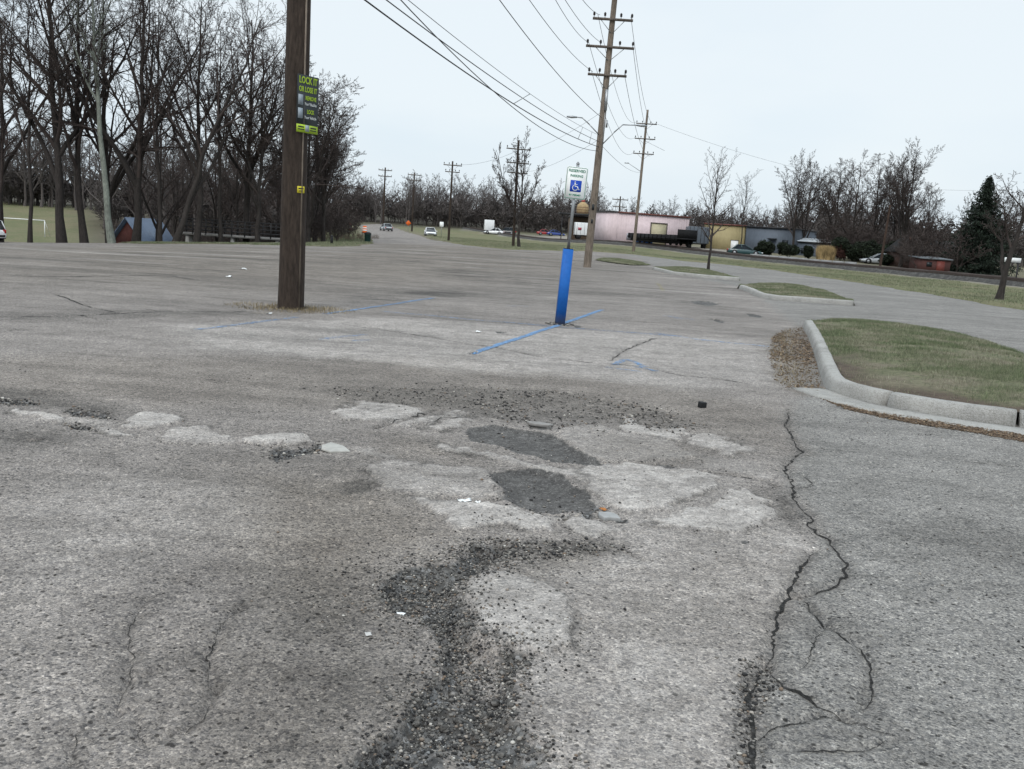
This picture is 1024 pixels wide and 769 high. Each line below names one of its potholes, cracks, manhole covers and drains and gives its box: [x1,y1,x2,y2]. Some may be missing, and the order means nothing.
crack [23,295,216,317]
pothole [66,409,113,420]
pothole [249,505,654,769]
crack [734,414,906,769]
crack [70,594,233,763]
pothole [265,441,323,463]
